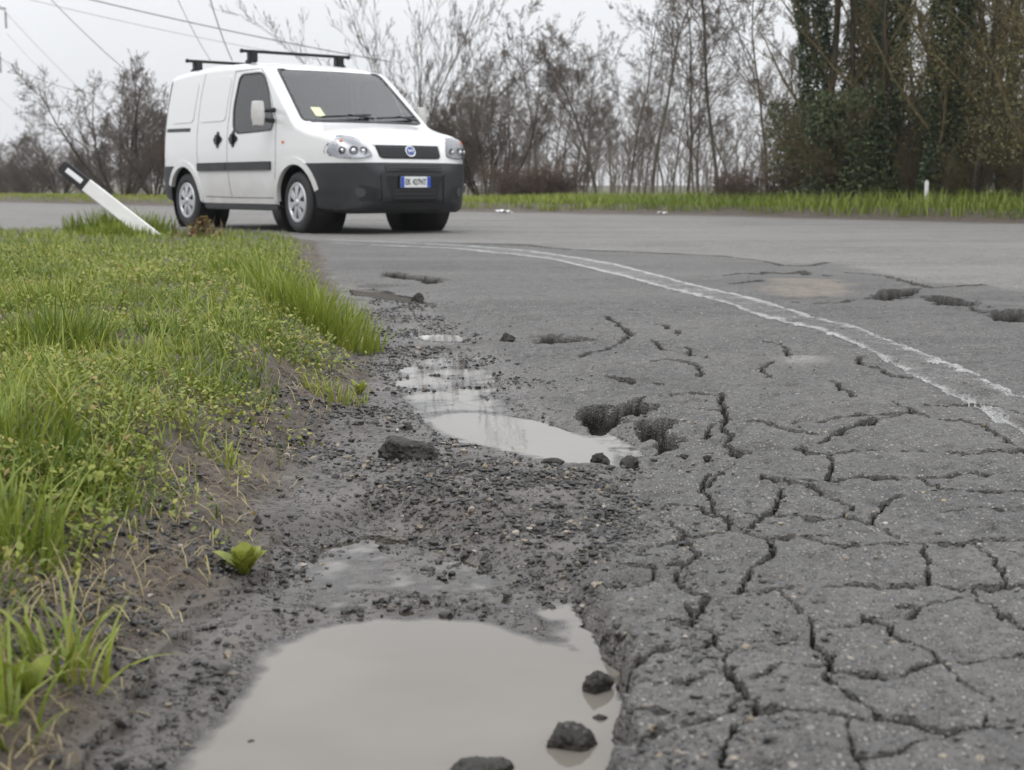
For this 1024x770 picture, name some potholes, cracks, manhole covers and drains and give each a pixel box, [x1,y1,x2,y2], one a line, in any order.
pothole [573,393,665,437]
pothole [527,333,601,345]
crack [578,316,1024,770]
pothole [378,272,452,284]
pothole [143,537,649,770]
pothole [912,295,991,310]
pothole [977,308,1024,322]
pothole [865,288,922,301]
pothole [339,287,457,305]
pothole [395,357,644,467]
